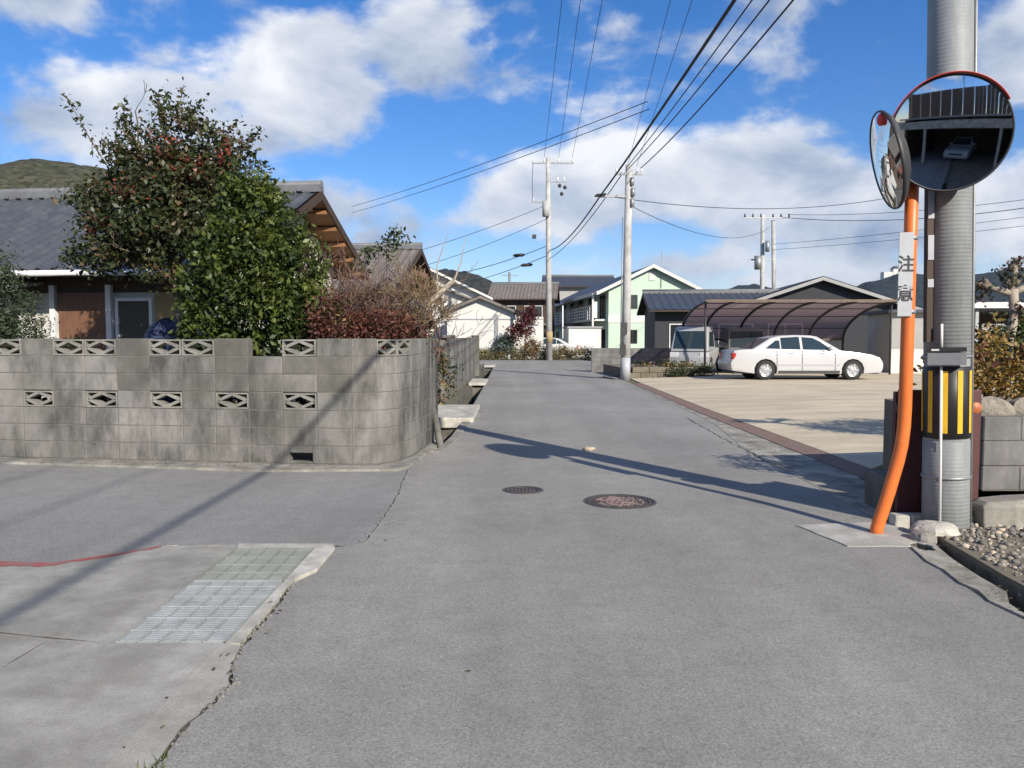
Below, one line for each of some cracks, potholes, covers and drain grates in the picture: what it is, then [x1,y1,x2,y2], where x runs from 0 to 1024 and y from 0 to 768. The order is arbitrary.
crack [130,584,295,768]
crack [687,418,773,464]
manhole cover [503,486,543,494]
manhole cover [584,494,656,509]
